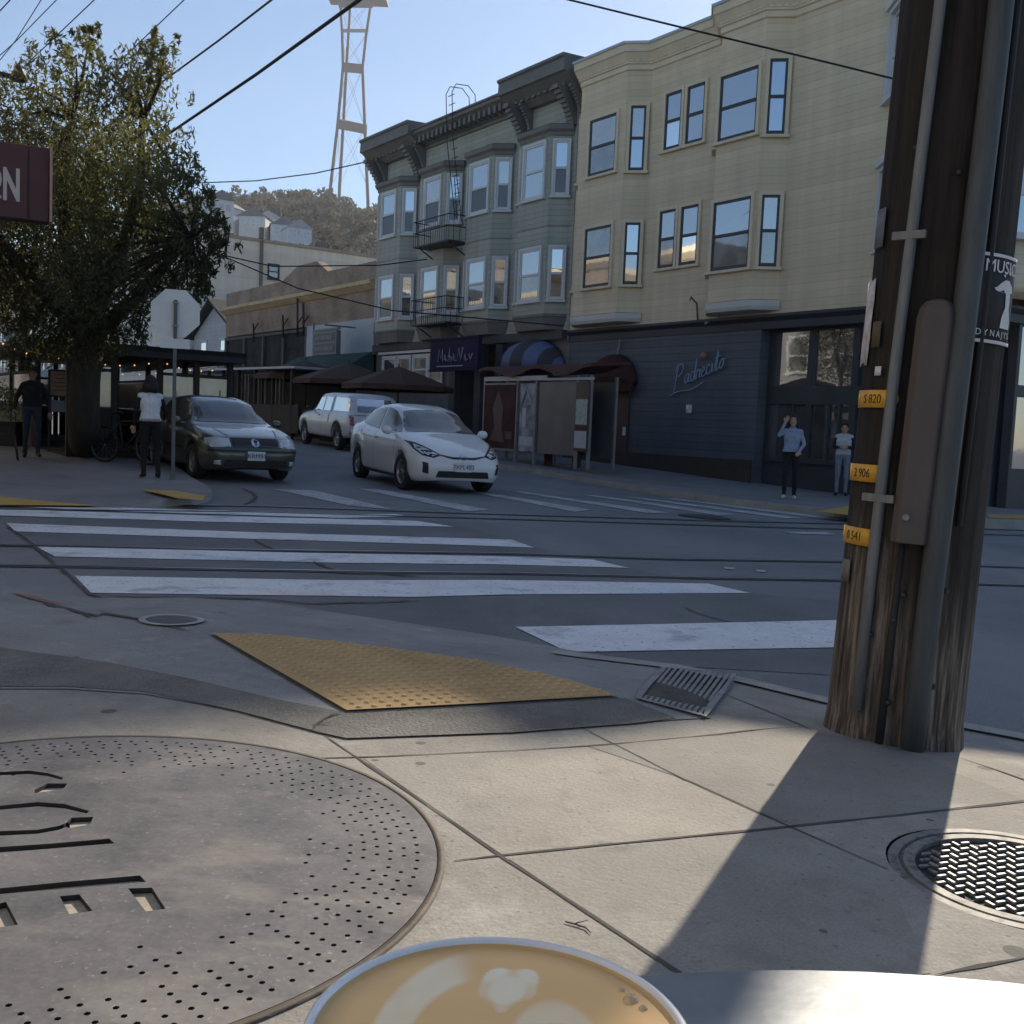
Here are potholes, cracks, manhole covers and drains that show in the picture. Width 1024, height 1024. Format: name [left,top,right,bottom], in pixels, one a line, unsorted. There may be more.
manhole cover [887,829,1024,930]
manhole cover [138,614,205,625]
drain grate [635,666,736,717]
crack [10,593,417,631]
